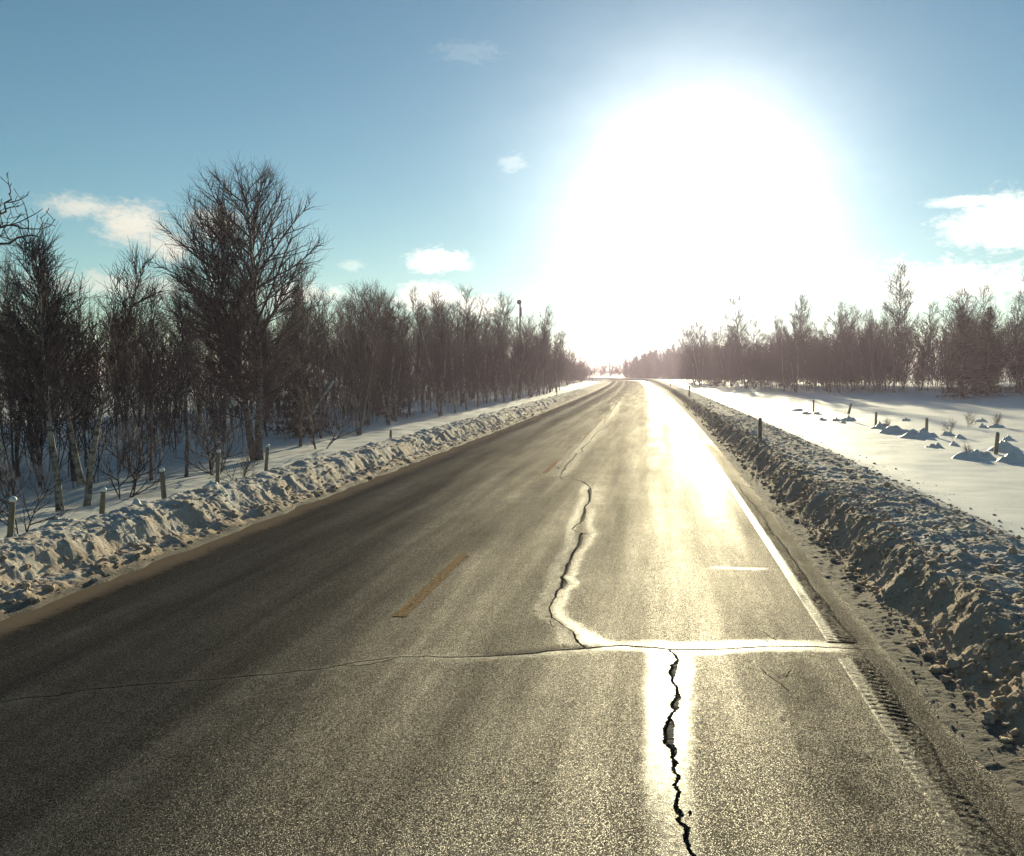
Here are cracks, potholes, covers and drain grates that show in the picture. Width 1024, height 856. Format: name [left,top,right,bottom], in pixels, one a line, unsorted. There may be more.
crack [0,396,872,856]
